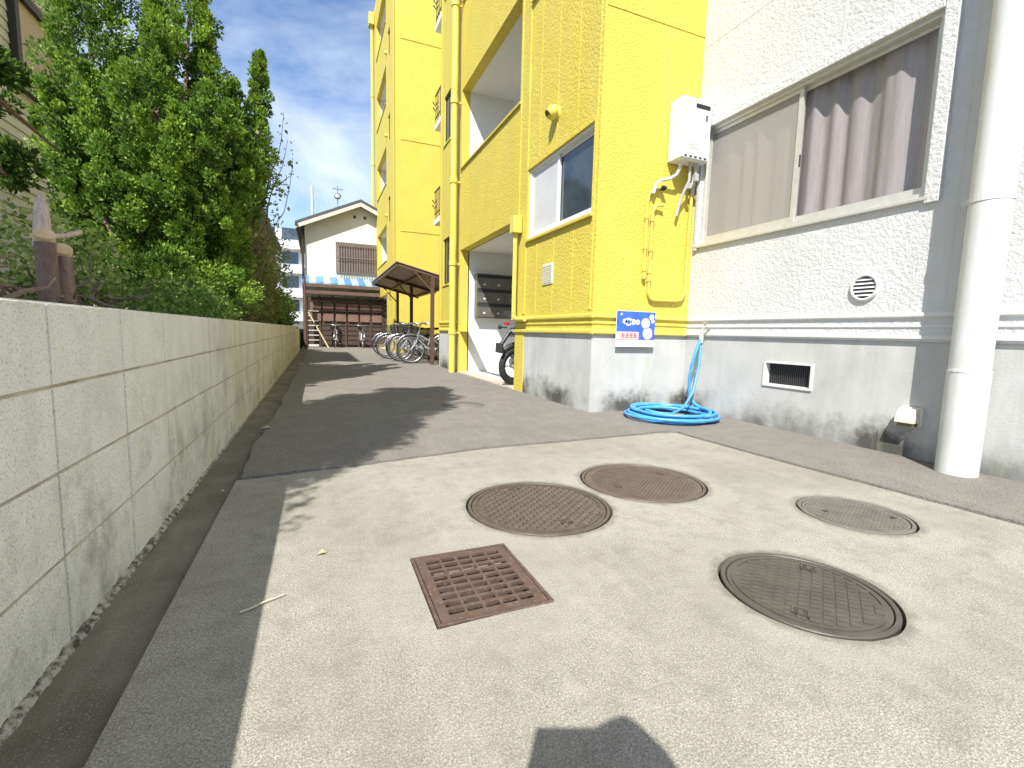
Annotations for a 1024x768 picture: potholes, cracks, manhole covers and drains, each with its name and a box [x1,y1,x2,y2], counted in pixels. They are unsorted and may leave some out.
manhole cover [797,497,917,535]
manhole cover [581,464,706,503]
manhole cover [467,483,611,537]
drain grate [411,543,554,630]
manhole cover [719,553,903,641]
